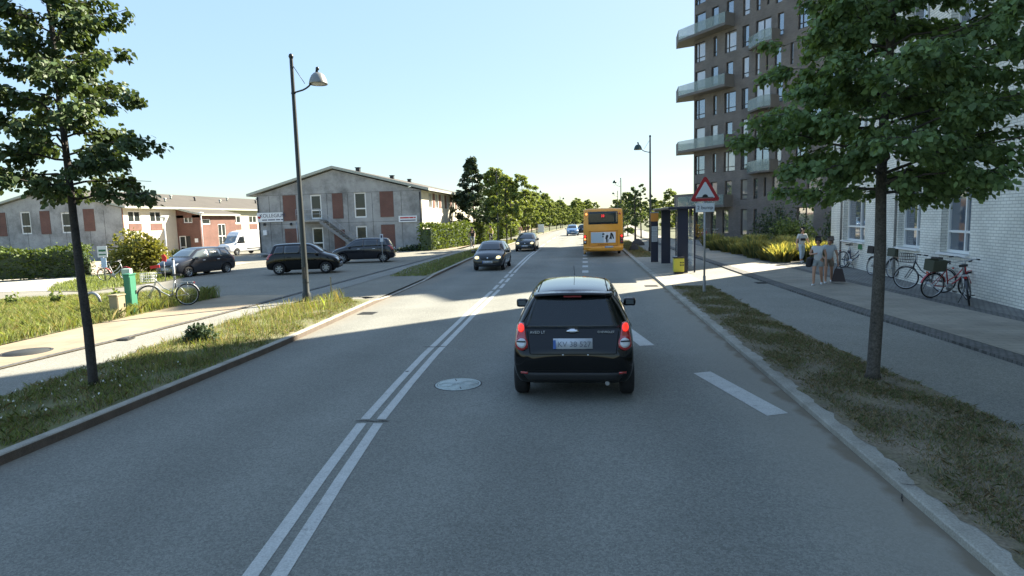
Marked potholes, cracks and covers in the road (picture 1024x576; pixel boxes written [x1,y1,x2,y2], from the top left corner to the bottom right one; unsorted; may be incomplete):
manhole cover [0,347,54,357]
manhole cover [434,378,482,391]
